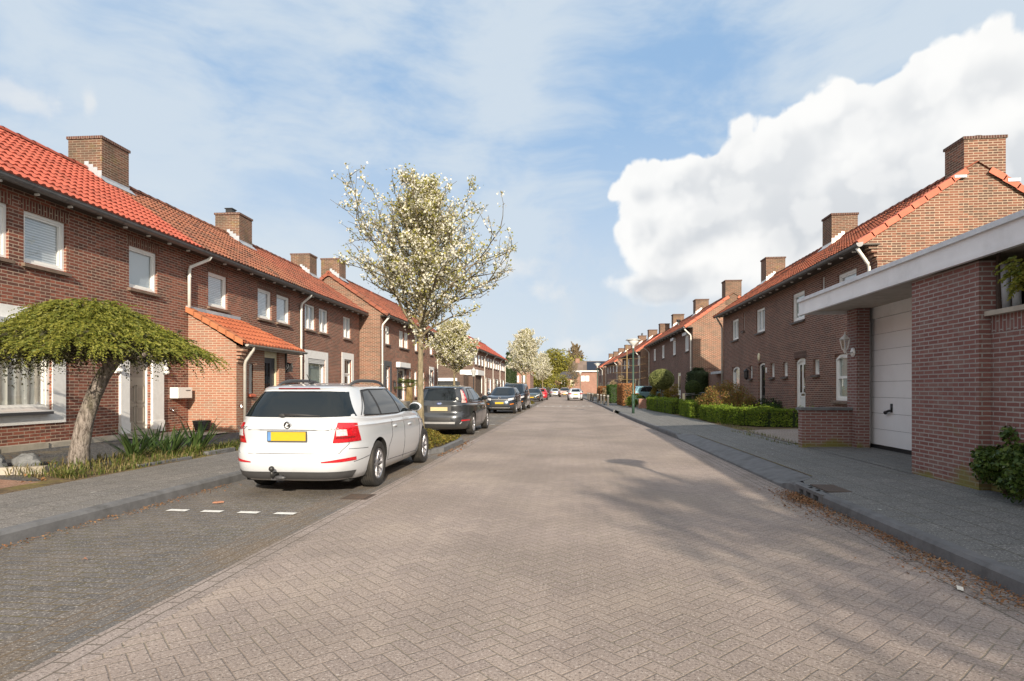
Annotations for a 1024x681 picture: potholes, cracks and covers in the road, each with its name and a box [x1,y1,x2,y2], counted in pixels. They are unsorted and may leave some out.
drain grate [796,484,852,503]
